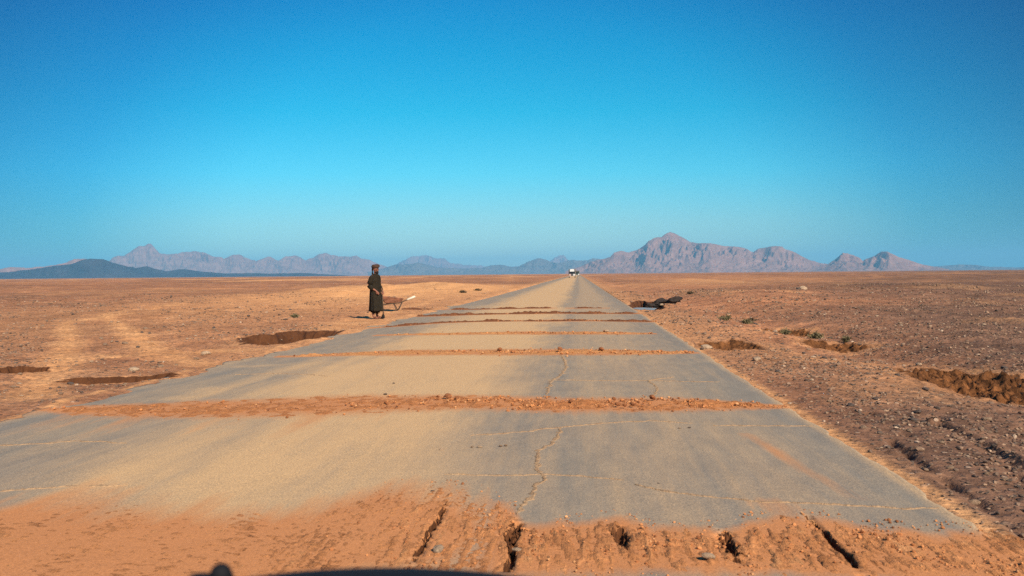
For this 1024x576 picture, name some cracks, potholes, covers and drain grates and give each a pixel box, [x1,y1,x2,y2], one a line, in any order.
crack [545,355,712,398]
crack [445,420,939,515]
